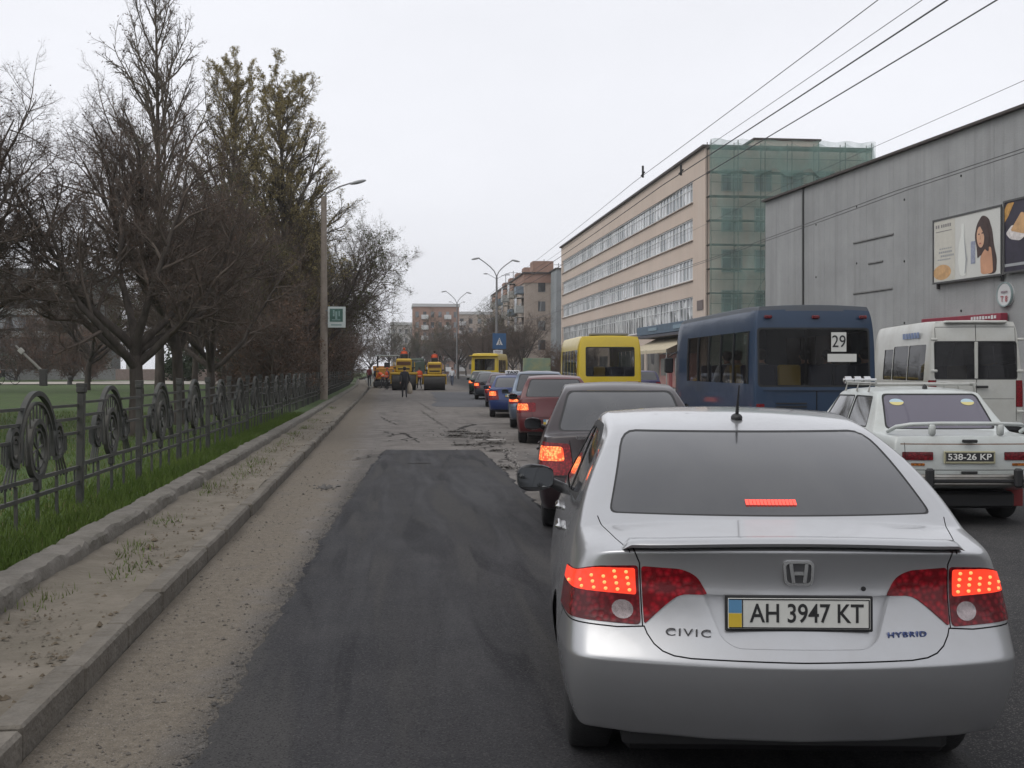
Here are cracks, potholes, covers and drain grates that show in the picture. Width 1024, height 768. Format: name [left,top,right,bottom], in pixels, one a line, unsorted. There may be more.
crack [380,403,528,475]
